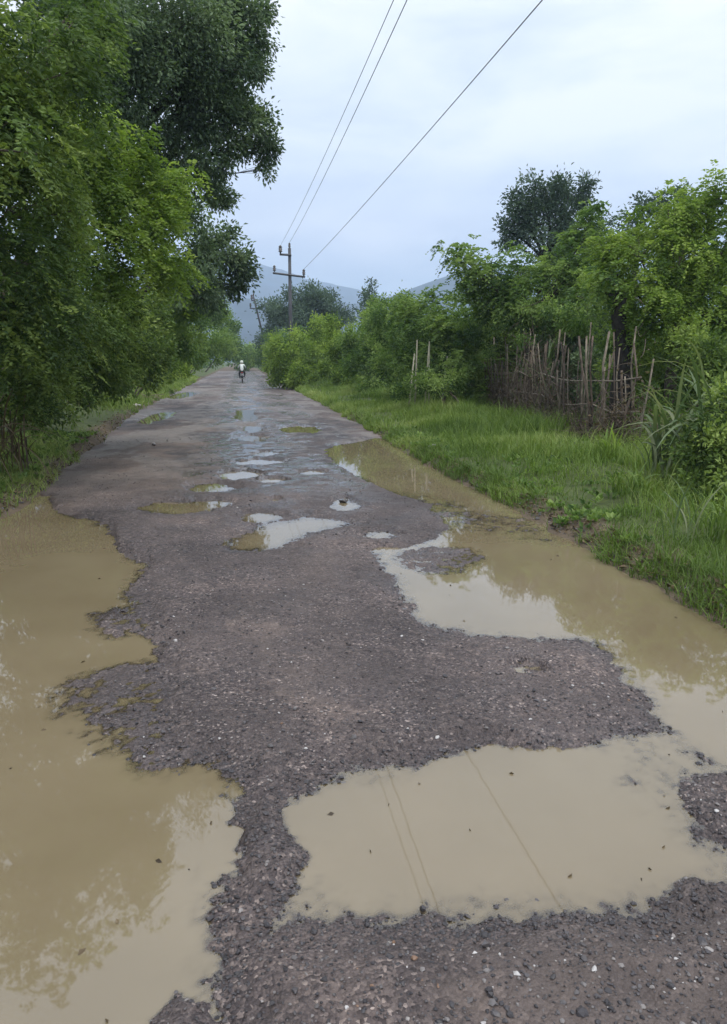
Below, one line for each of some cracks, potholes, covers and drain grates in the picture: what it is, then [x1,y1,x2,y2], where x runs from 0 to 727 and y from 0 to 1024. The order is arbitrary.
pothole [241,723,727,950]
pothole [320,436,727,836]
pothole [135,410,181,425]
pothole [229,508,290,524]
pothole [180,480,241,492]
pothole [278,424,326,433]
pothole [213,468,266,480]
pothole [213,512,363,552]
pothole [0,492,264,1024]
